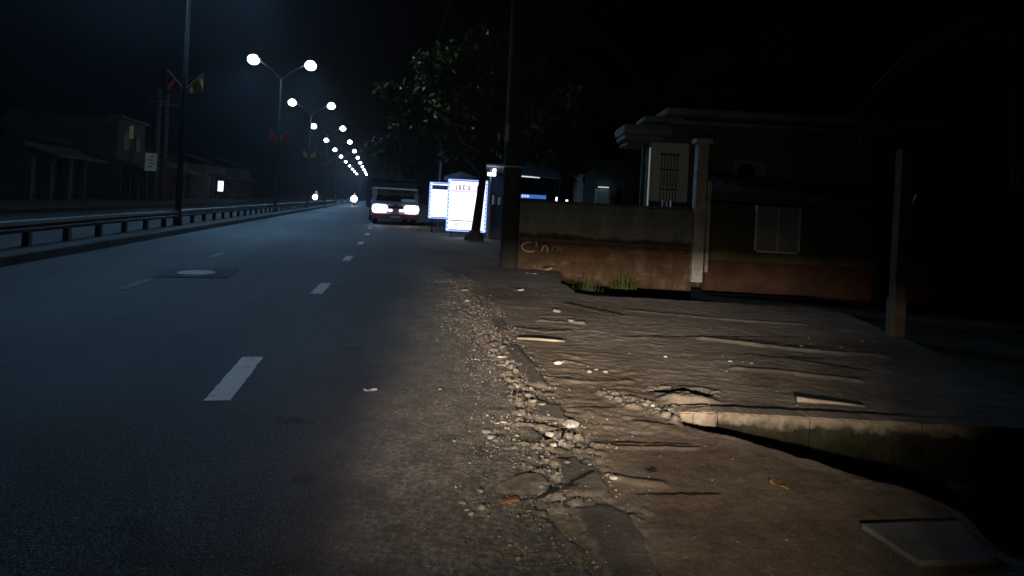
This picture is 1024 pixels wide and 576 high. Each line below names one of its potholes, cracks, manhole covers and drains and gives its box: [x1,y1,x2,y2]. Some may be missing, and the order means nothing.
crack [520,471,600,501]
crack [622,336,872,372]
manhole cover [154,268,238,278]
crack [508,303,624,330]
pothole [641,386,722,398]
crack [578,406,677,426]
